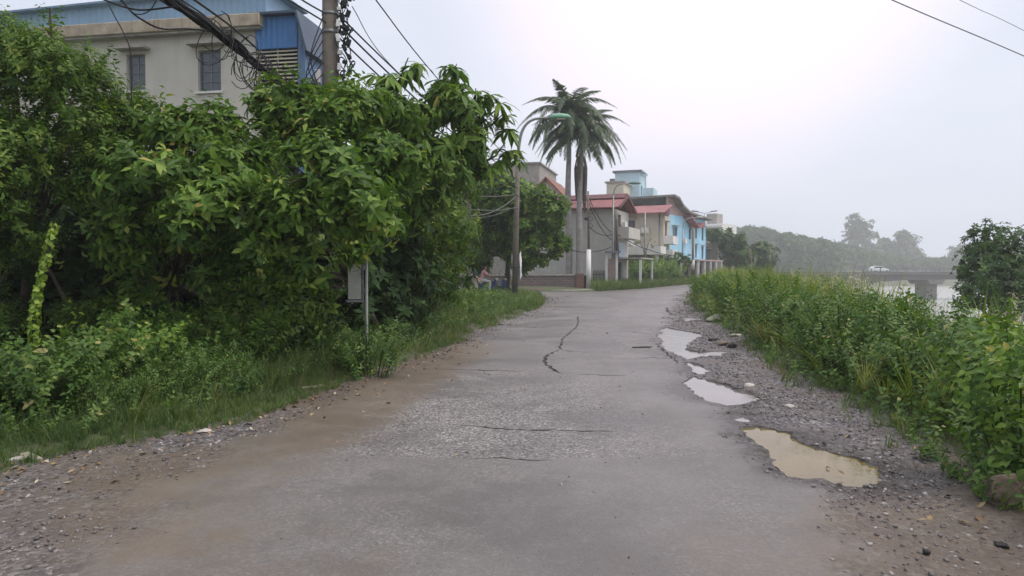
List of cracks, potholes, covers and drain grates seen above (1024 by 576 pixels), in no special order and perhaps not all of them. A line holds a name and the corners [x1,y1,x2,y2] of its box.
pothole [682,375,761,405]
crack [455,424,614,432]
pothole [656,328,730,359]
pothole [738,425,882,487]
pothole [682,362,710,374]
crack [542,316,589,374]
